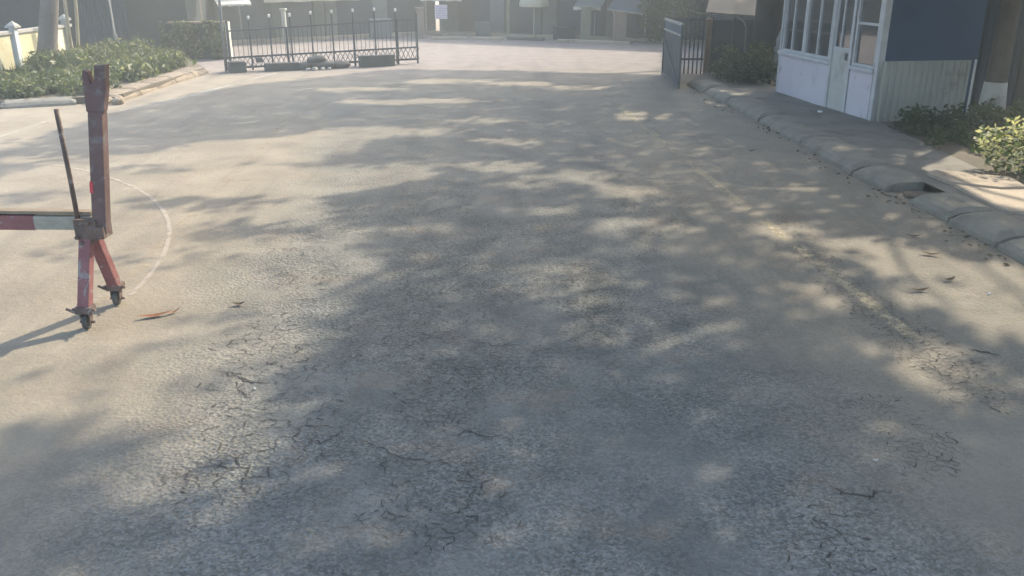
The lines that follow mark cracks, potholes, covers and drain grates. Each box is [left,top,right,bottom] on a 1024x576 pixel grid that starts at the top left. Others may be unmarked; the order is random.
crack [341,441,521,560]
crack [148,303,364,514]
crack [768,213,1017,417]
crack [782,488,913,573]
